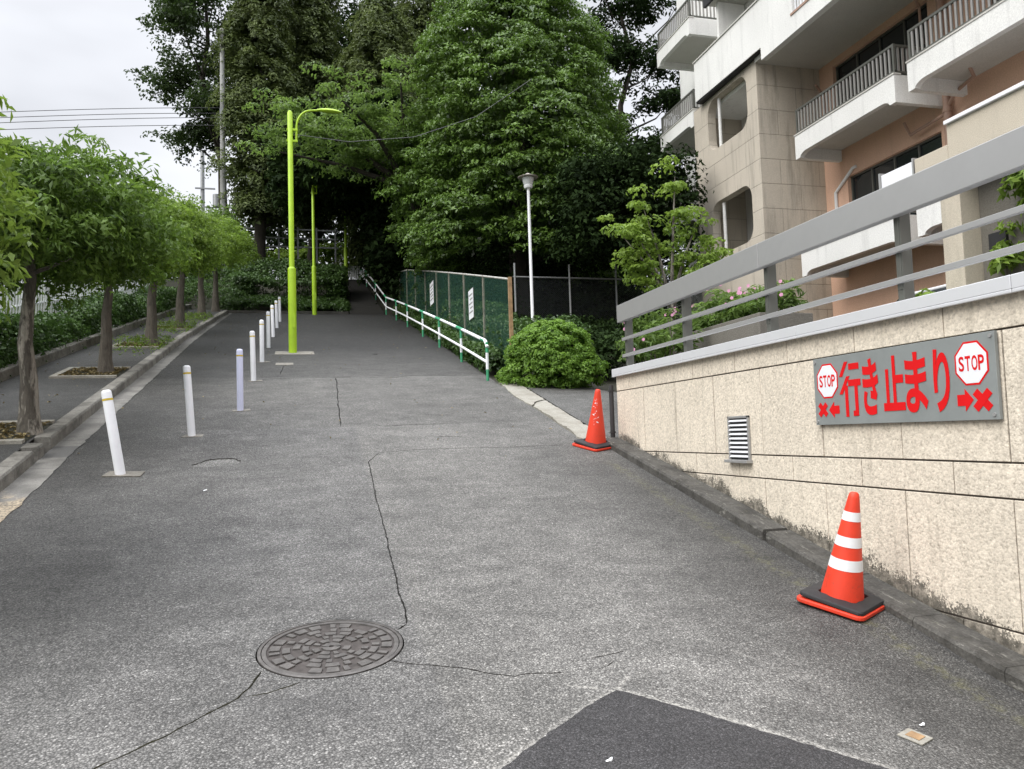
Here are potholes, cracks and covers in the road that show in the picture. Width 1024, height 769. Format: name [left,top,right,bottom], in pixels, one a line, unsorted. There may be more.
crack [93,672,301,769]
crack [389,660,561,677]
manhole cover [257,620,403,679]
